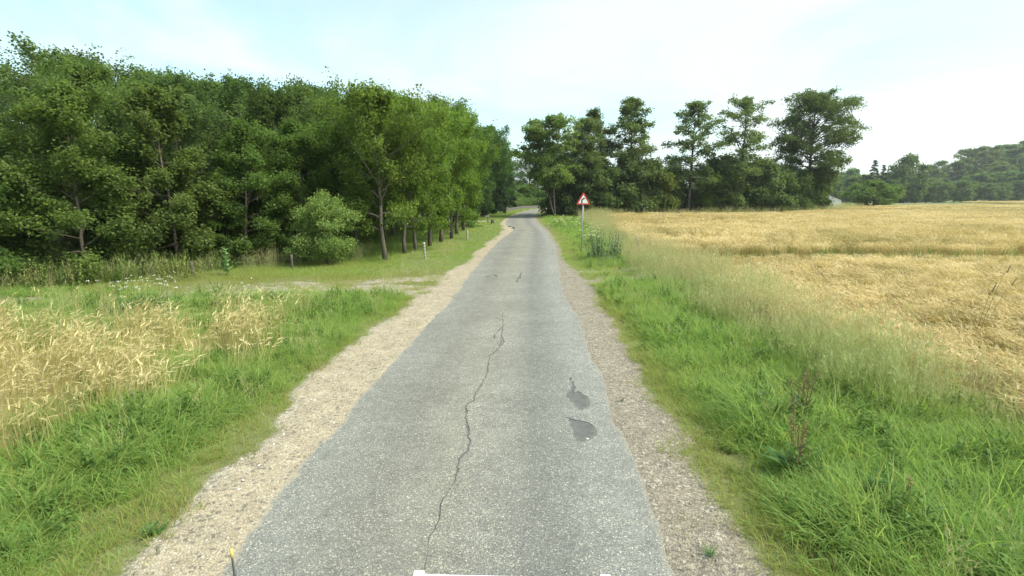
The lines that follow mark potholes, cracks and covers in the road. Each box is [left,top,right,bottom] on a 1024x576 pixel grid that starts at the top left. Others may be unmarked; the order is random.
crack [424,309,507,570]
pothole [565,416,597,442]
pothole [566,377,592,410]
